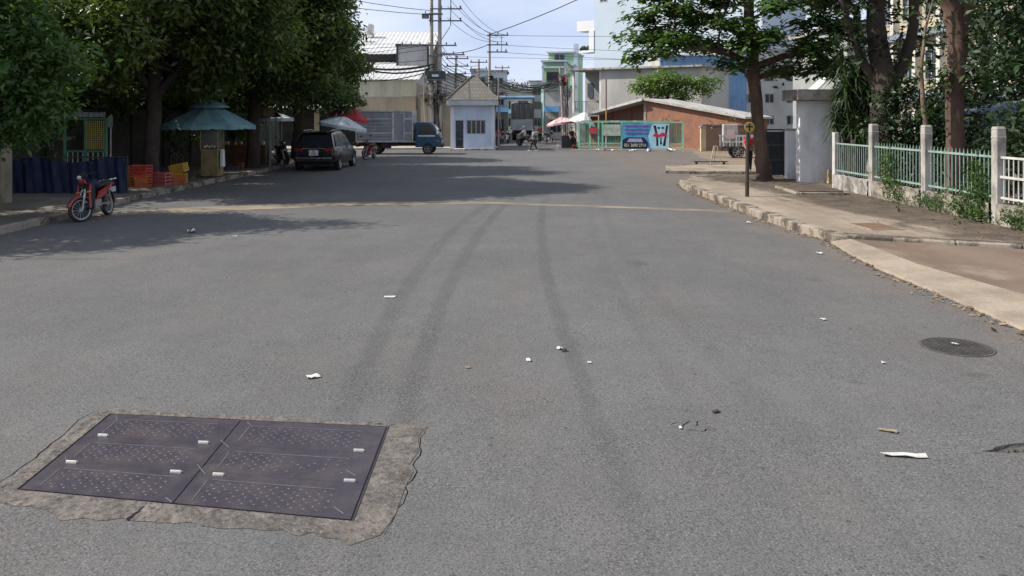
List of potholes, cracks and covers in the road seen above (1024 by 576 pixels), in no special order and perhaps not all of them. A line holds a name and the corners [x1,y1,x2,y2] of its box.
manhole cover [0,407,426,545]
manhole cover [919,337,996,357]
pothole [982,443,1024,453]
